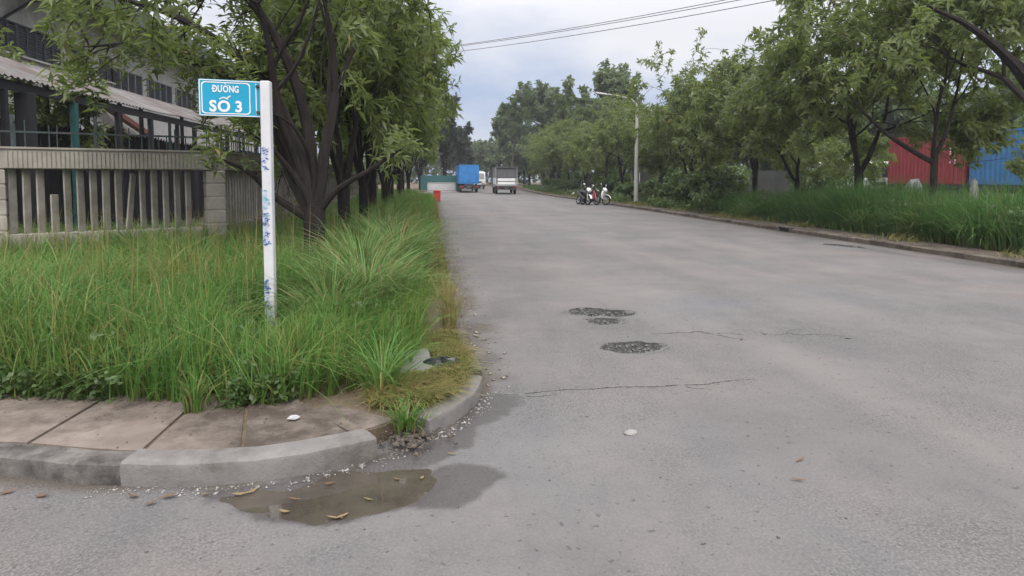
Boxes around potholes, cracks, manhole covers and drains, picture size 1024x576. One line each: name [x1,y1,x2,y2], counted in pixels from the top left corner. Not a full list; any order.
crack [651,331,743,340]
pothole [564,307,639,318]
pothole [597,341,671,355]
pothole [582,318,628,326]
crack [501,378,754,399]
crack [763,329,849,339]
